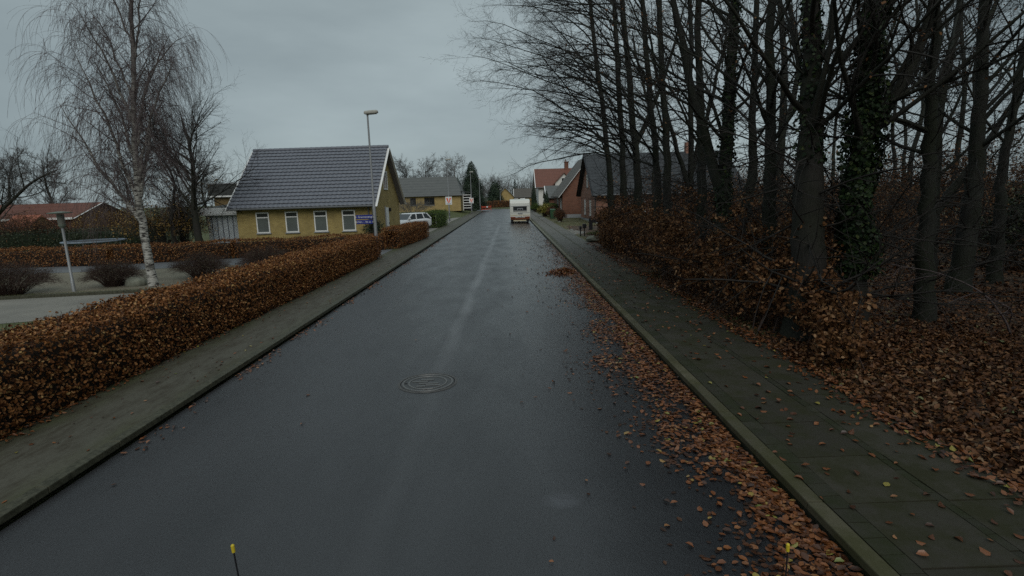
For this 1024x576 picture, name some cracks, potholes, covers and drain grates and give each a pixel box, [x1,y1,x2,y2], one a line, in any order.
manhole cover [398,373,458,393]
